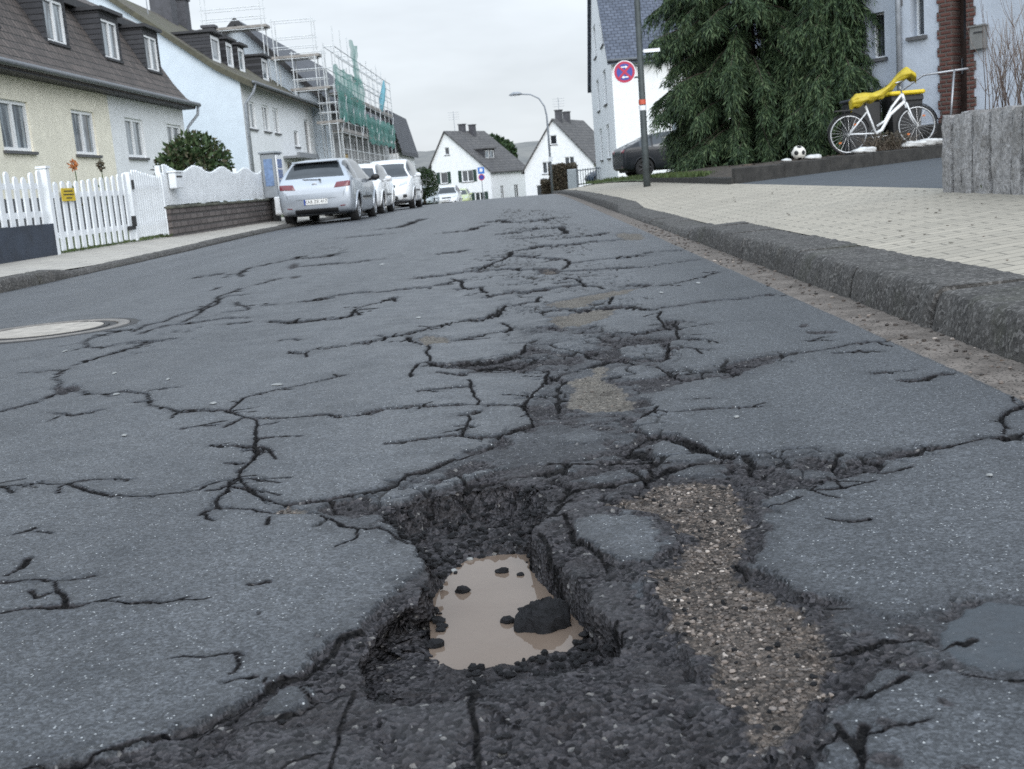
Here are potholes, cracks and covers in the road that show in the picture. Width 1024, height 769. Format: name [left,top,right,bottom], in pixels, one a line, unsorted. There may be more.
crack [800,336,957,383]
crack [0,217,788,547]
crack [958,672,1024,683]
crack [463,691,522,769]
manhole cover [0,318,139,344]
crack [742,395,1024,531]
crack [732,563,982,769]
crack [529,397,767,667]
pothole [356,483,631,703]
crack [0,557,368,769]
